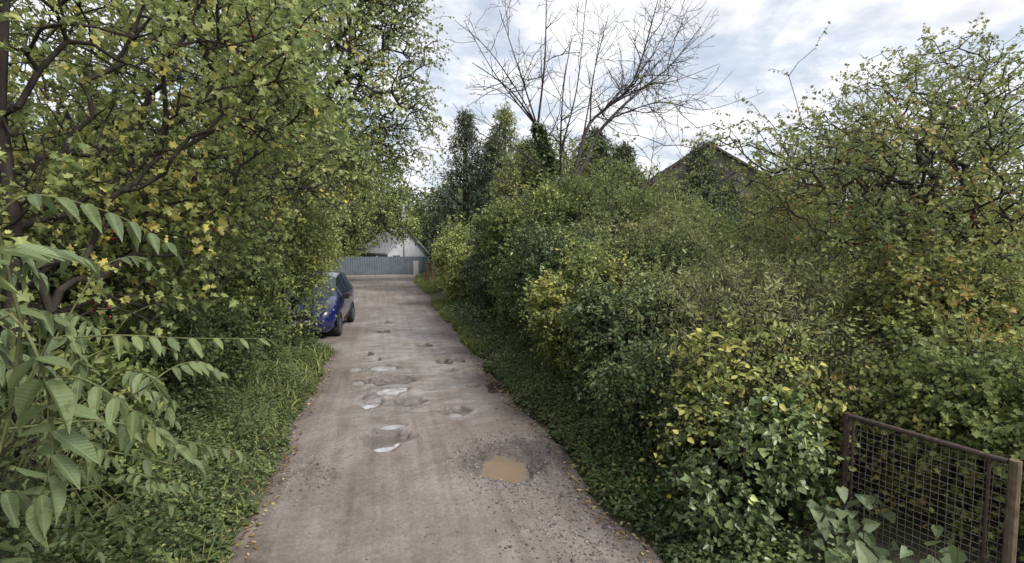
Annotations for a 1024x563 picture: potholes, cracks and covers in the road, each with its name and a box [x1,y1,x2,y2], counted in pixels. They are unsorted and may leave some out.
pothole [448,433,553,486]
pothole [376,422,409,430]
pothole [348,392,389,410]
pothole [391,396,430,407]
pothole [432,404,476,418]
pothole [366,364,403,372]
pothole [370,385,414,397]
pothole [484,380,502,394]
pothole [354,425,421,453]
